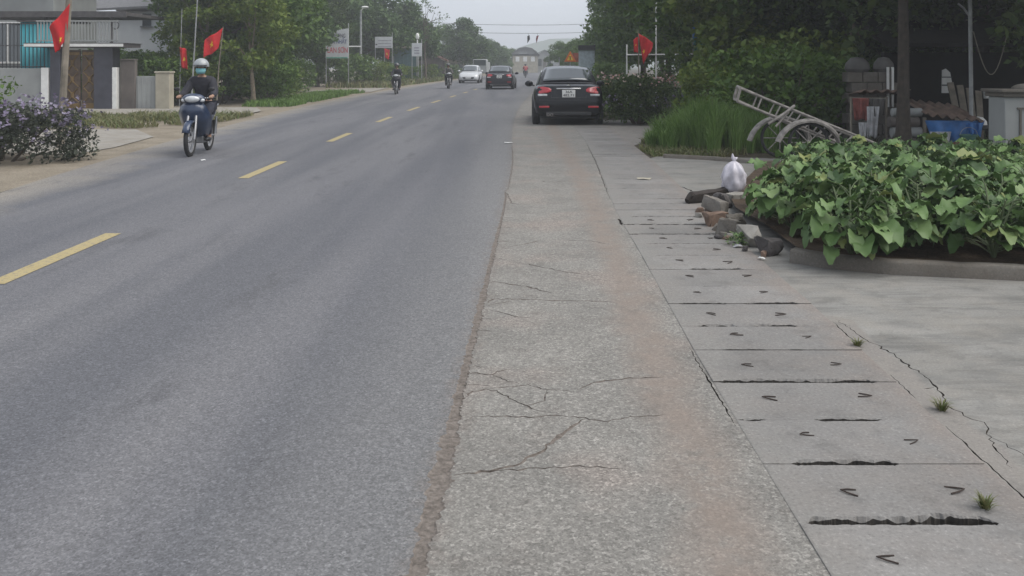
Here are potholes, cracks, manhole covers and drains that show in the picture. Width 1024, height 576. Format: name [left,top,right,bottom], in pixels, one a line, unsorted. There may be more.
crack [691,350,736,426]
crack [405,147,660,576]
crack [835,320,1024,498]
